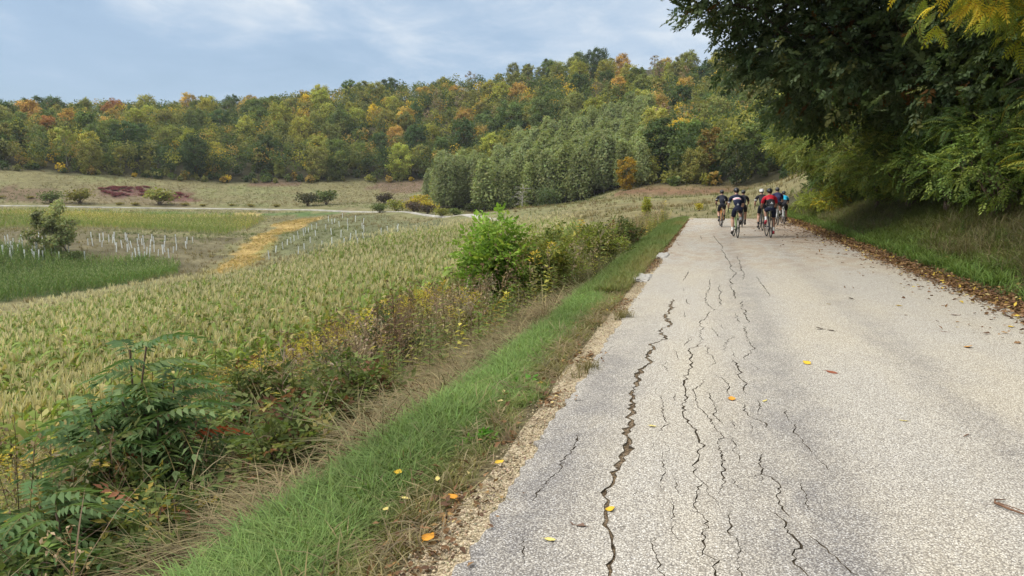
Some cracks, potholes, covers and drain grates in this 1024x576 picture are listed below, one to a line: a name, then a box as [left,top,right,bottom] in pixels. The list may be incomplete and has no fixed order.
crack [601,236,857,576]
crack [533,435,579,500]
